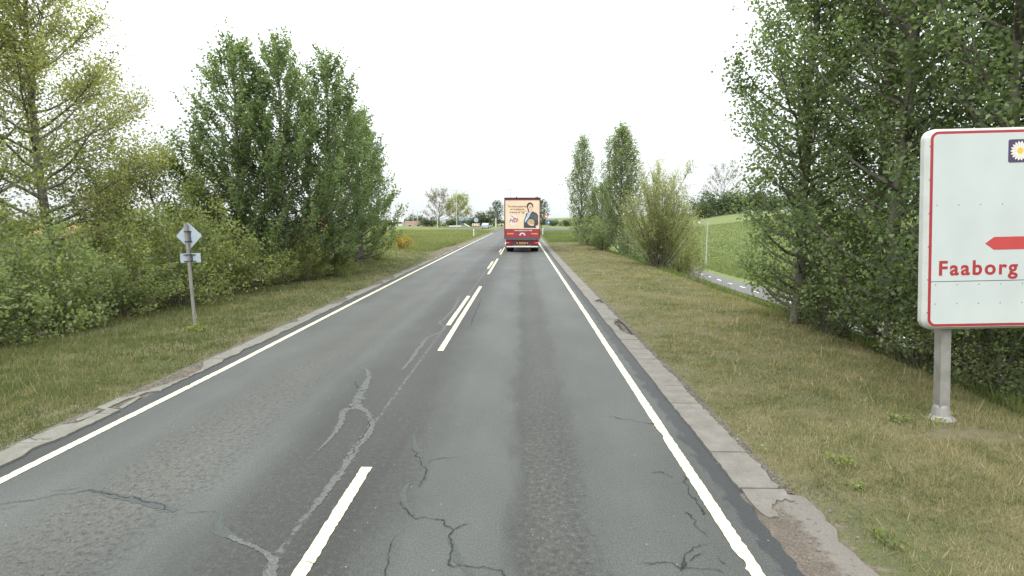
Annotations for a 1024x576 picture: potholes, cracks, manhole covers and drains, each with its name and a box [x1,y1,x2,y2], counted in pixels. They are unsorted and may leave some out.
crack [400,435,506,576]
crack [639,471,726,571]
crack [0,488,279,576]
